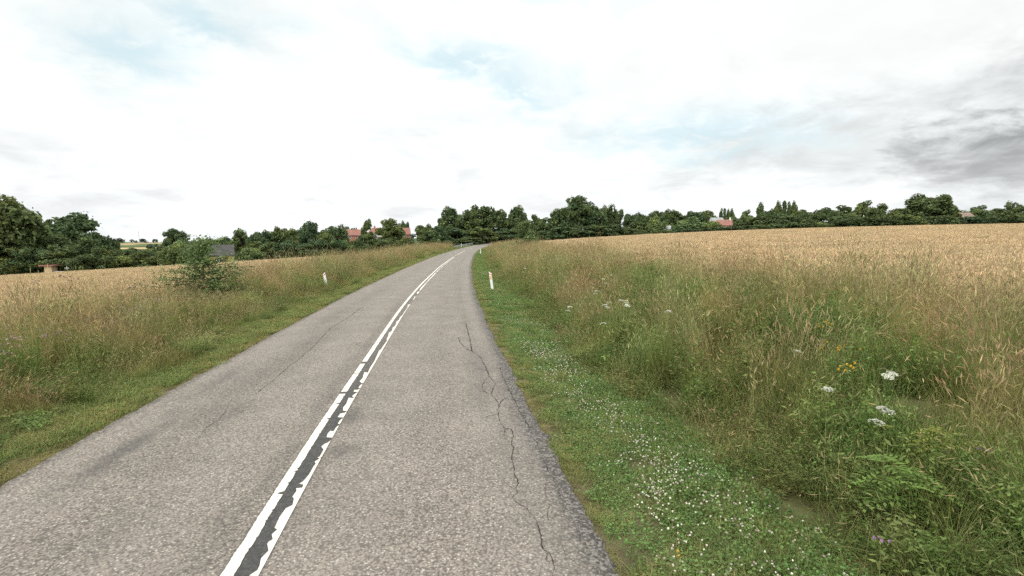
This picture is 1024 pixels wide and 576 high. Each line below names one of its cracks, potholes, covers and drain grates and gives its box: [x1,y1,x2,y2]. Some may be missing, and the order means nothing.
crack [458,324,582,572]
